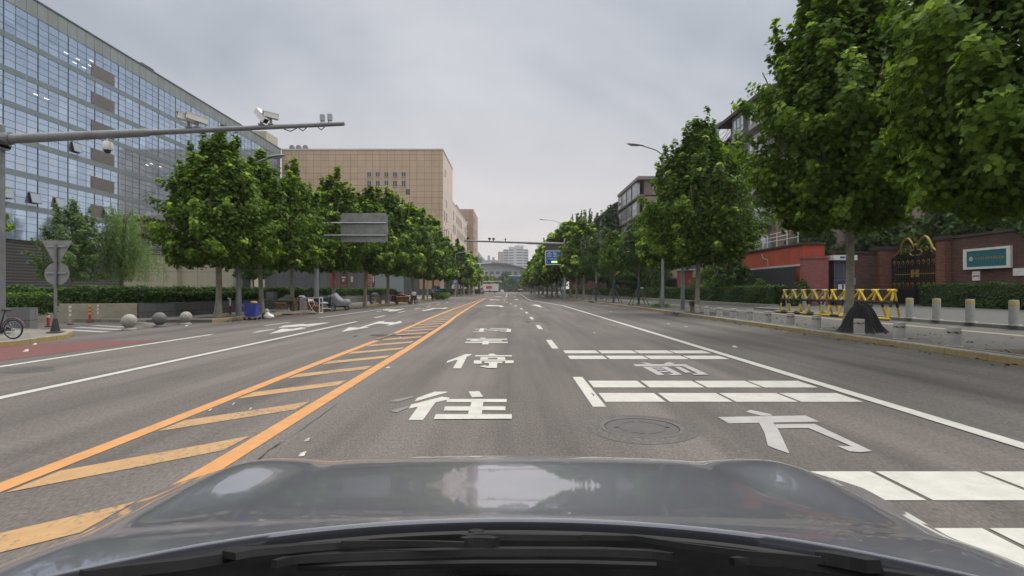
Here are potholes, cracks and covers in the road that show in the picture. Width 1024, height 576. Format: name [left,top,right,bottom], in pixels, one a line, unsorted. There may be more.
manhole cover [586,415,701,444]
crack [256,401,340,460]
